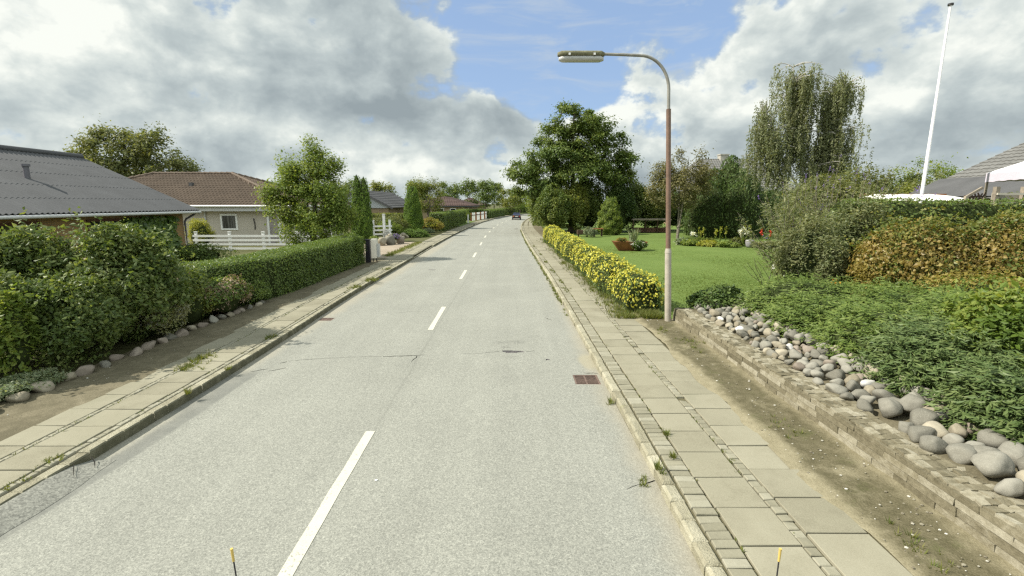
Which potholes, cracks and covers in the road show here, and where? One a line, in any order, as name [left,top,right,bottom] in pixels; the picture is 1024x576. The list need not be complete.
drain grate [573,375,601,384]
